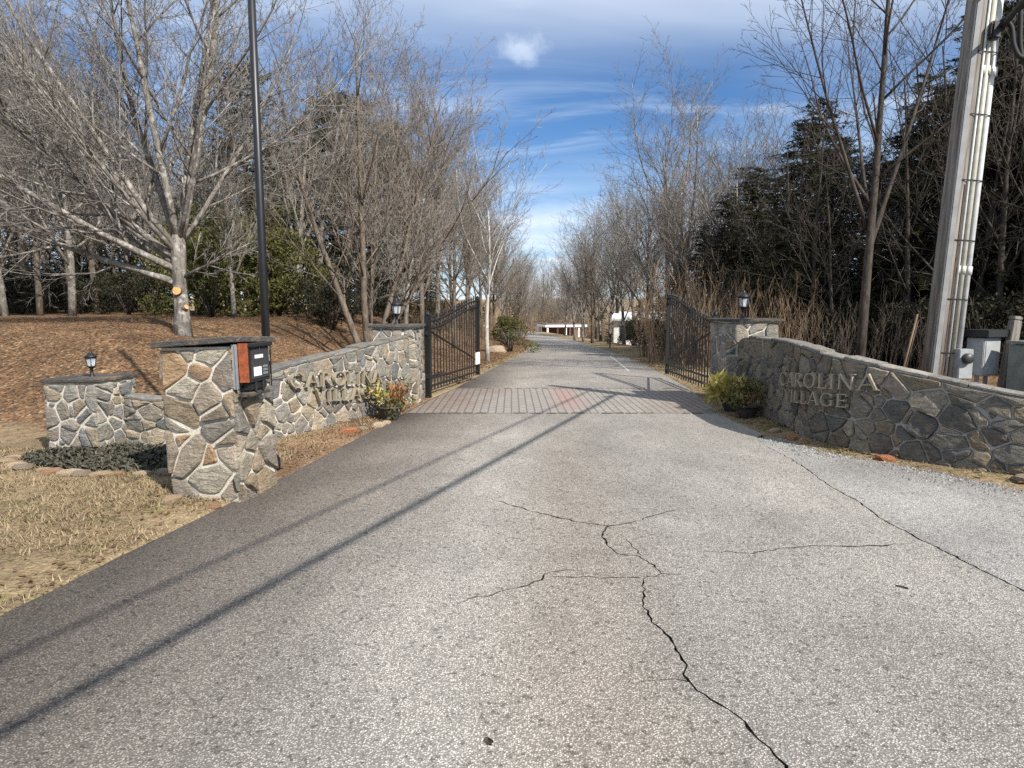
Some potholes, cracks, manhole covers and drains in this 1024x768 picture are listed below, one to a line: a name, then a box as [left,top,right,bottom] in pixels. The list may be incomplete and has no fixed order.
crack [711,543,908,554]
crack [460,500,789,768]
